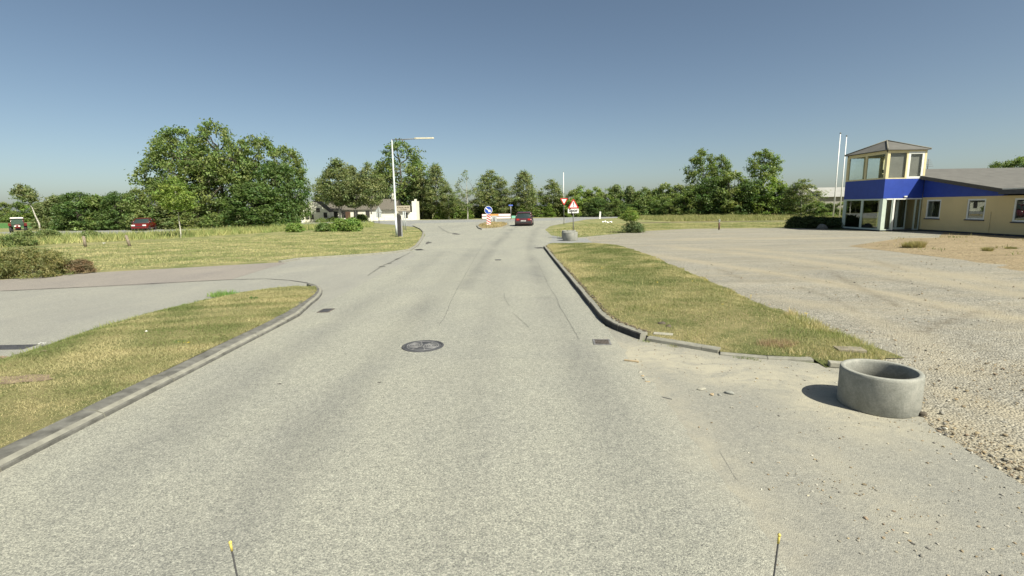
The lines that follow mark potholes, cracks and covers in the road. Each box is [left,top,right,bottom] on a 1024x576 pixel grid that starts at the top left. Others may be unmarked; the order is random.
manhole cover [402,340,444,352]
